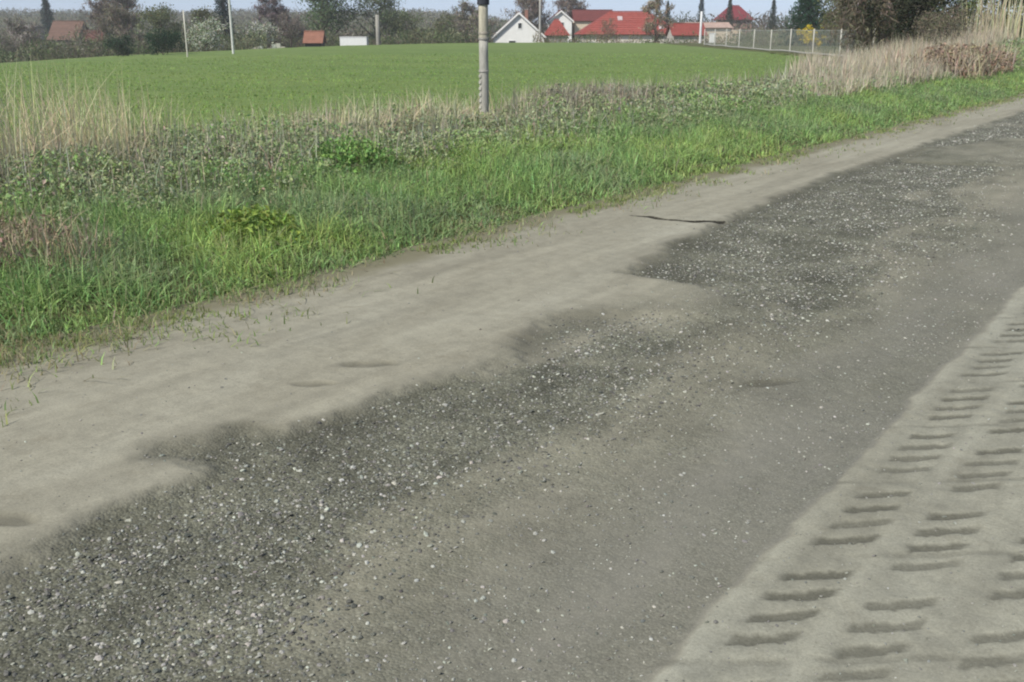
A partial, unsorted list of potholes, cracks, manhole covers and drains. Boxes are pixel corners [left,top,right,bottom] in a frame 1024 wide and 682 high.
crack [631,215,724,224]
